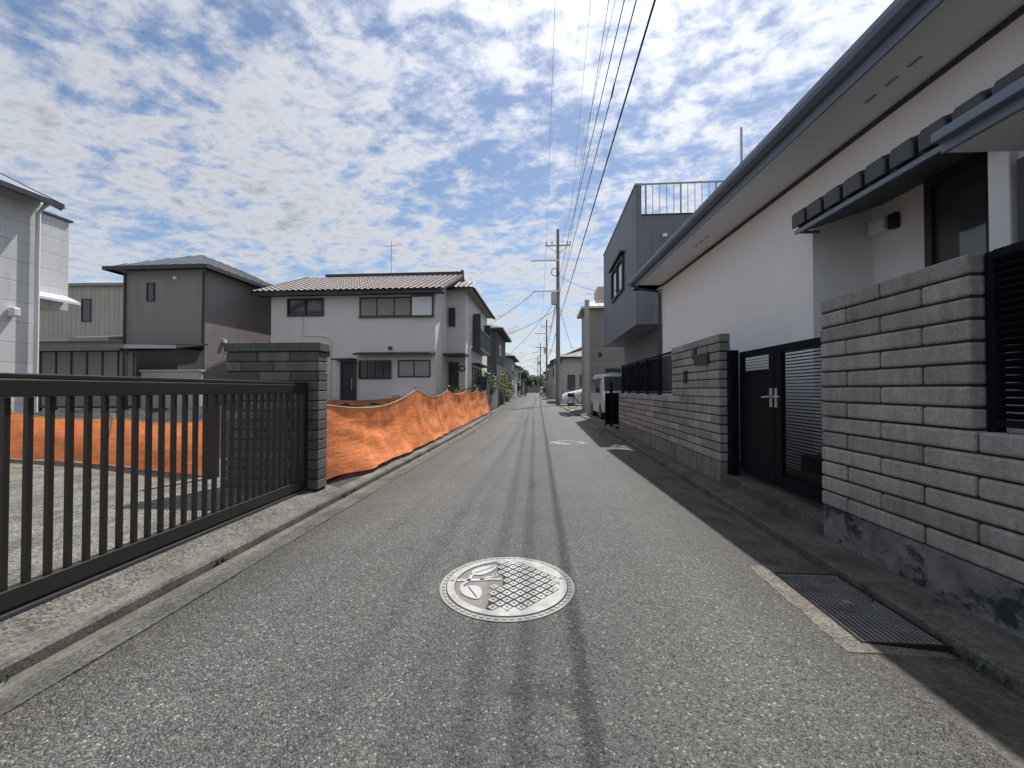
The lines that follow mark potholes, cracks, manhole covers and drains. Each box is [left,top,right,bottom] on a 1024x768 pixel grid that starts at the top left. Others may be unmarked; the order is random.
manhole cover [440,557,575,623]
drain grate [748,565,958,660]
